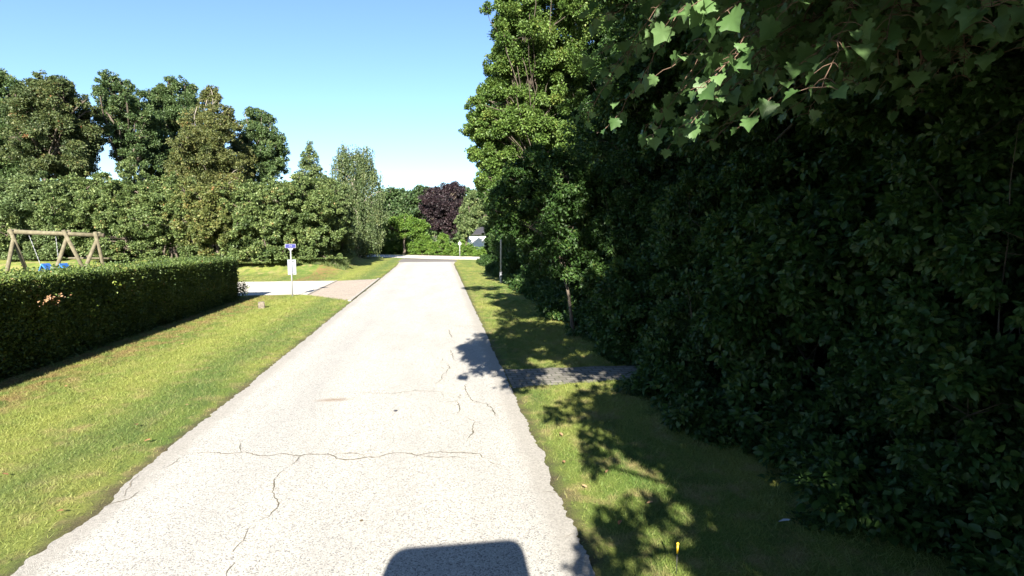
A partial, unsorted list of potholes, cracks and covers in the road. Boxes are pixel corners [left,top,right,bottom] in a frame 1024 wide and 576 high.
crack [201,325,507,574]
